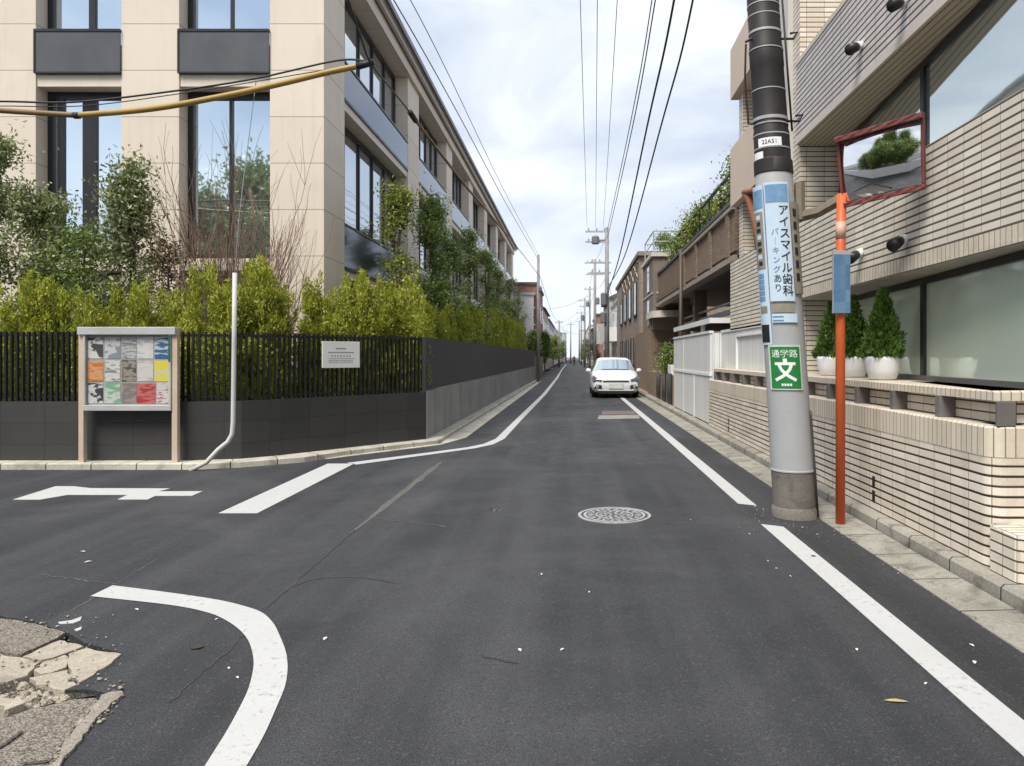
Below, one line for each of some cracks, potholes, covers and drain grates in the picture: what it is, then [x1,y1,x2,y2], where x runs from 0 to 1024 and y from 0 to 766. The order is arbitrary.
crack [41,559,157,614]
manhole cover [578,507,651,524]
pothole [0,680,95,711]
